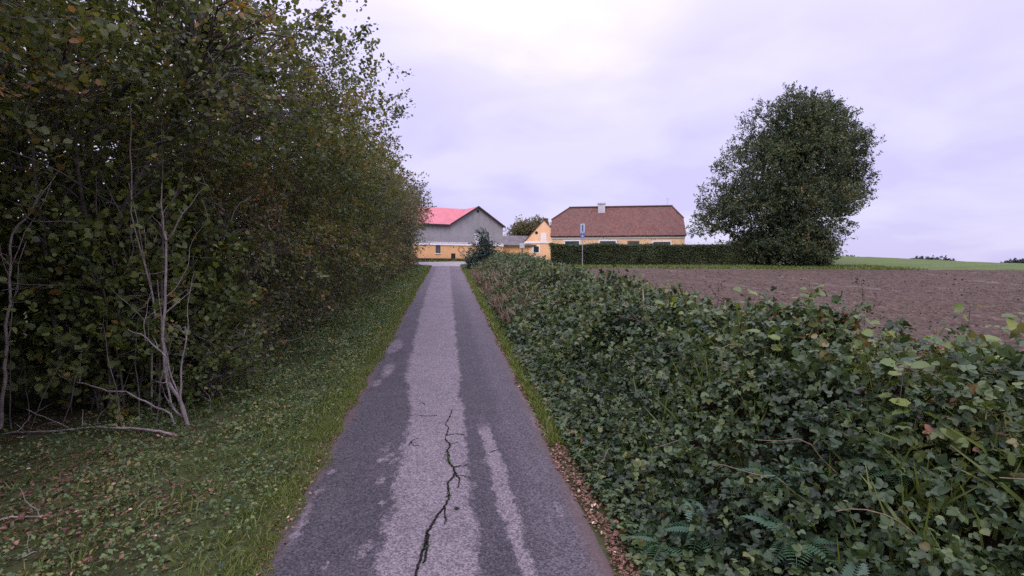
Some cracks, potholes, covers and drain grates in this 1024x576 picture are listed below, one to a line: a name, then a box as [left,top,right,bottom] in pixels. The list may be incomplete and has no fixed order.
crack [408,403,467,576]
